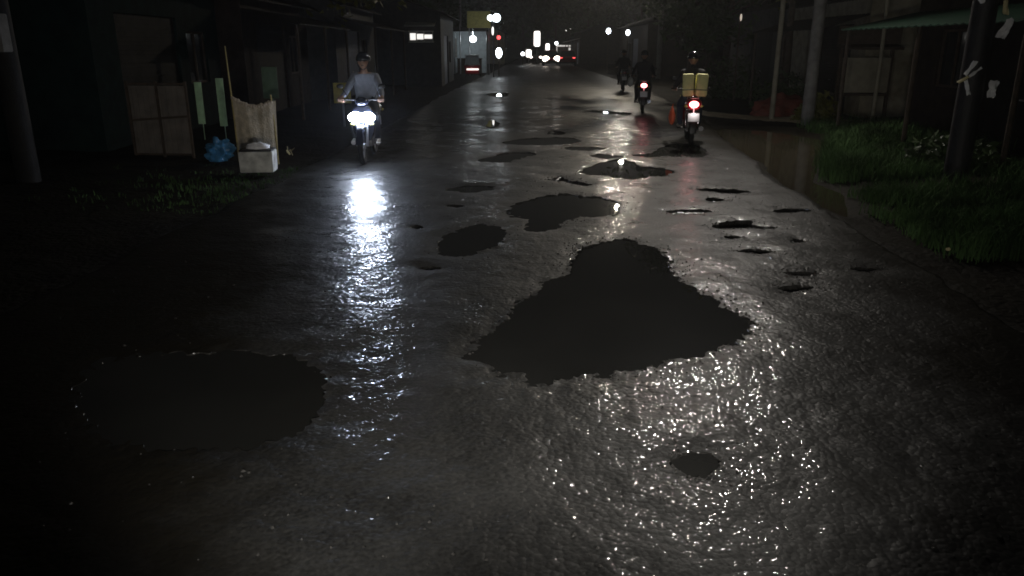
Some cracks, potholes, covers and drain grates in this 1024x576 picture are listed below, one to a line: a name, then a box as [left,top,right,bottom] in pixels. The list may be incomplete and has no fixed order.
pothole [578,159,675,179]
pothole [669,451,720,481]
pothole [445,185,496,193]
pothole [506,193,621,232]
pothole [478,152,536,163]
pothole [778,284,814,293]
pothole [712,220,775,229]
pothole [461,238,757,387]
pothole [436,223,507,257]
pothole [67,349,331,452]
pothole [632,144,709,157]
